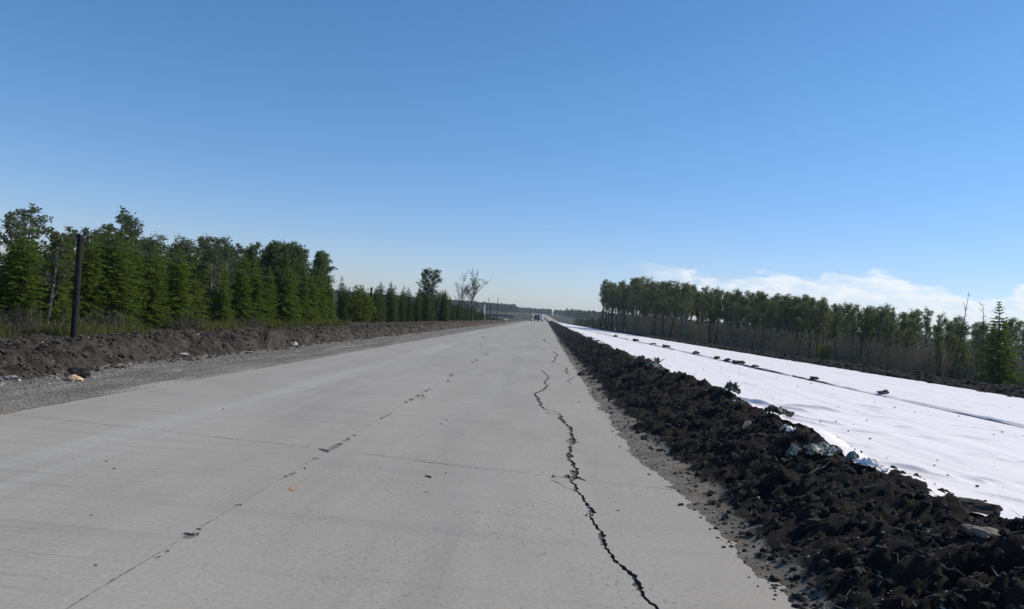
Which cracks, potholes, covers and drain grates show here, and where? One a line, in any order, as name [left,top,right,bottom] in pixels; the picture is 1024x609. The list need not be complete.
crack [534,339,659,609]
